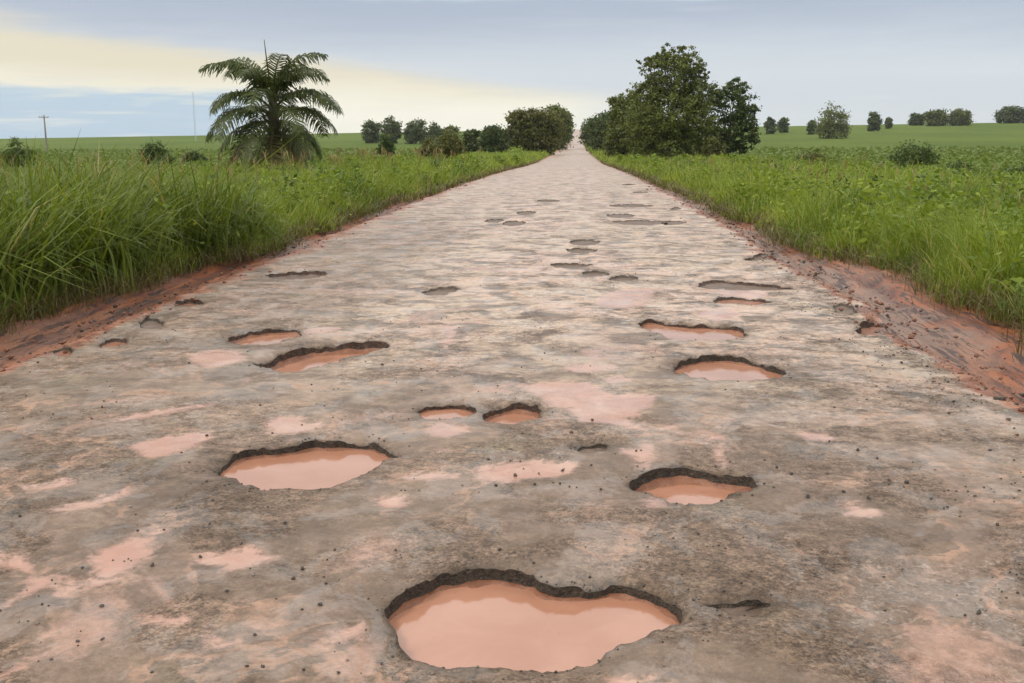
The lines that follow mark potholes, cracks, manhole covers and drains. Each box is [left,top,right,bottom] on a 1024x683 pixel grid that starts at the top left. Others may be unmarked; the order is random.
pothole [422,286,460,295]
pothole [384,568,683,673]
pothole [639,319,746,340]
pothole [254,341,390,372]
pothole [218,440,398,490]
pothole [629,468,758,505]
pothole [699,280,792,291]
pothole [674,355,787,381]
pothole [855,321,888,336]
pothole [227,328,302,345]
pothole [482,403,542,424]
pothole [714,297,771,305]
